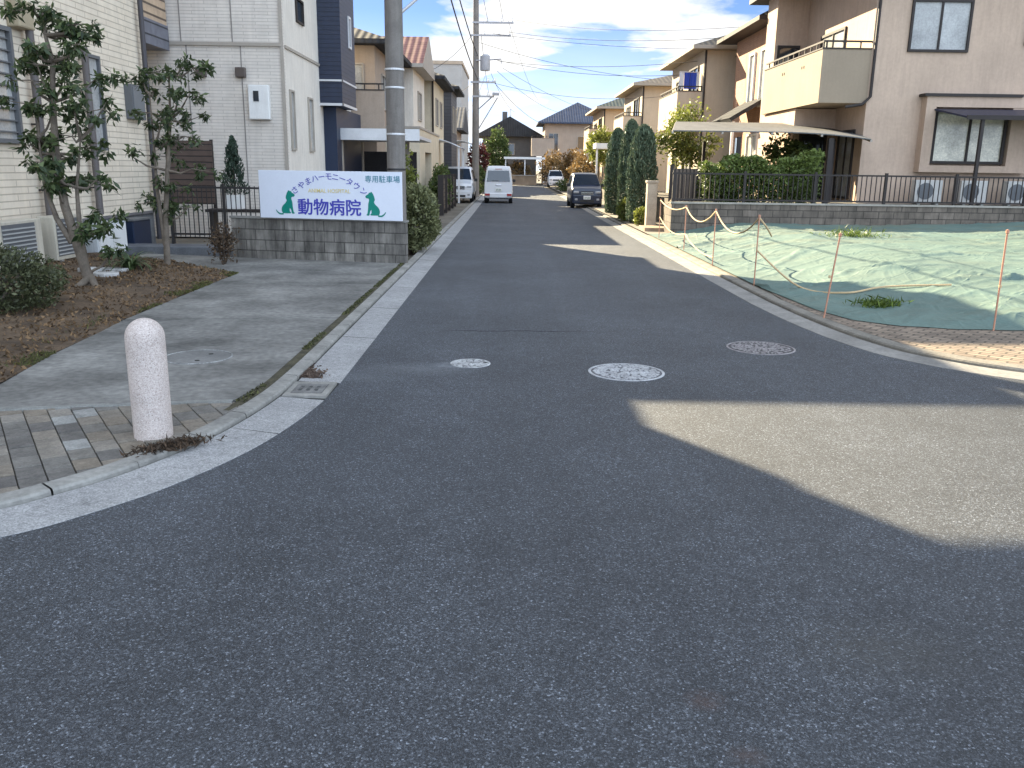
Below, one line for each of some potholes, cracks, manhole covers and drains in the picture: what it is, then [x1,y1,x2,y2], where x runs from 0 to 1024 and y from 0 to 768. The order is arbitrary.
manhole cover [167,350,233,364]
manhole cover [588,363,665,381]
manhole cover [726,341,796,355]
manhole cover [450,359,490,368]
